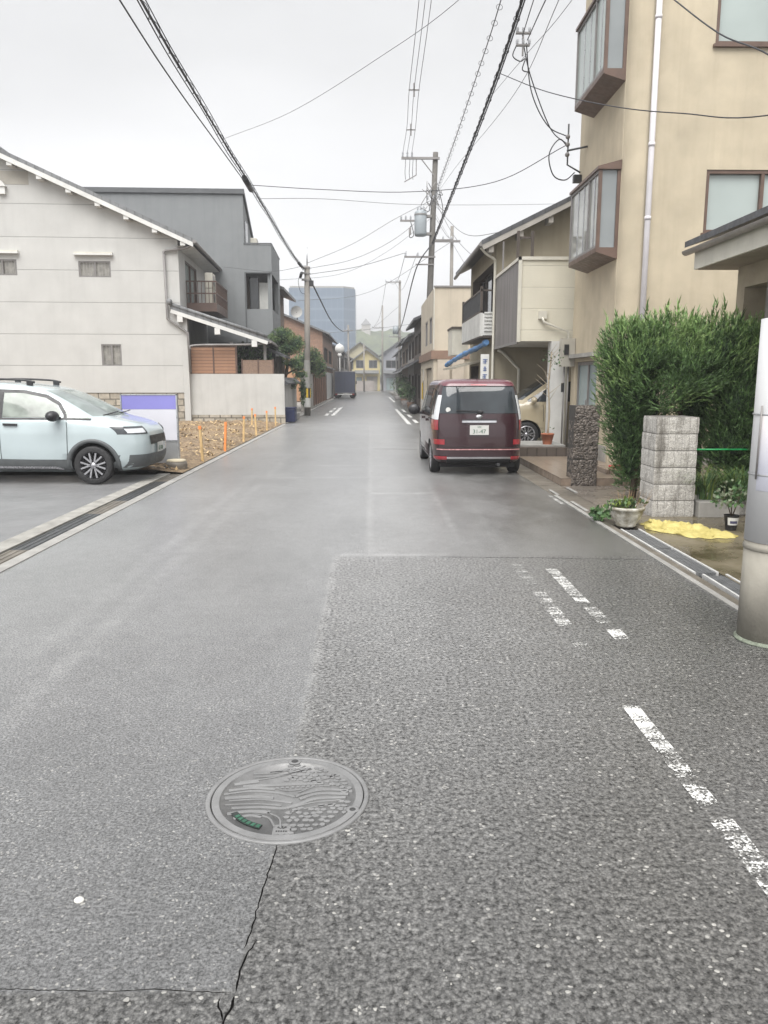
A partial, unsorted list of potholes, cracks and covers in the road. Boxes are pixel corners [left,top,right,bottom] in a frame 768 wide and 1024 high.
drain grate [620,529,674,550]
drain grate [653,548,719,577]
manhole cover [205,756,369,845]
drain grate [702,574,740,600]
crack [0,845,277,1024]
